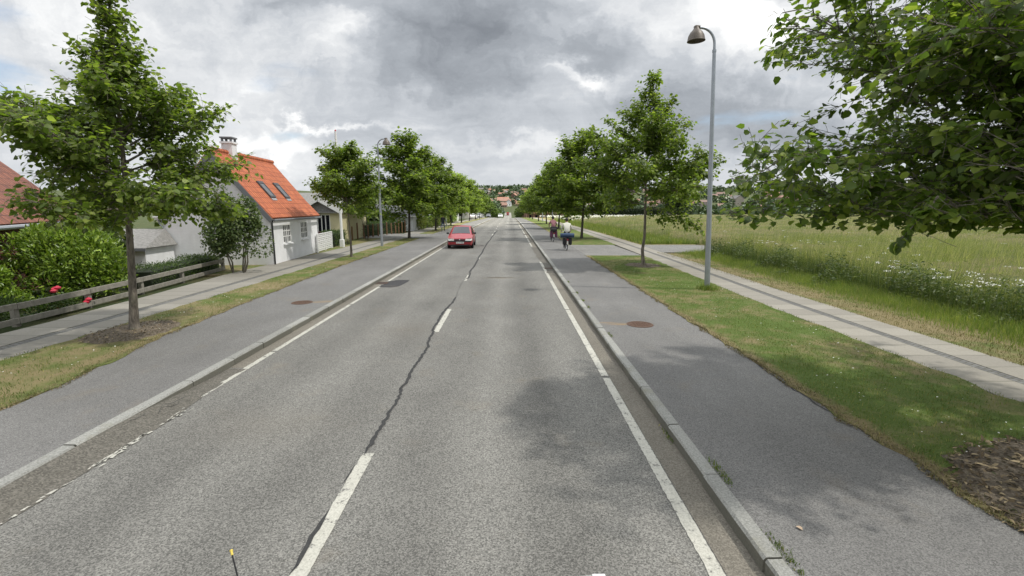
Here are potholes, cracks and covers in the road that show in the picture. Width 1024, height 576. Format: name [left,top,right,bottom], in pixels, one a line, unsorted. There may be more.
crack [290,230,498,574]
